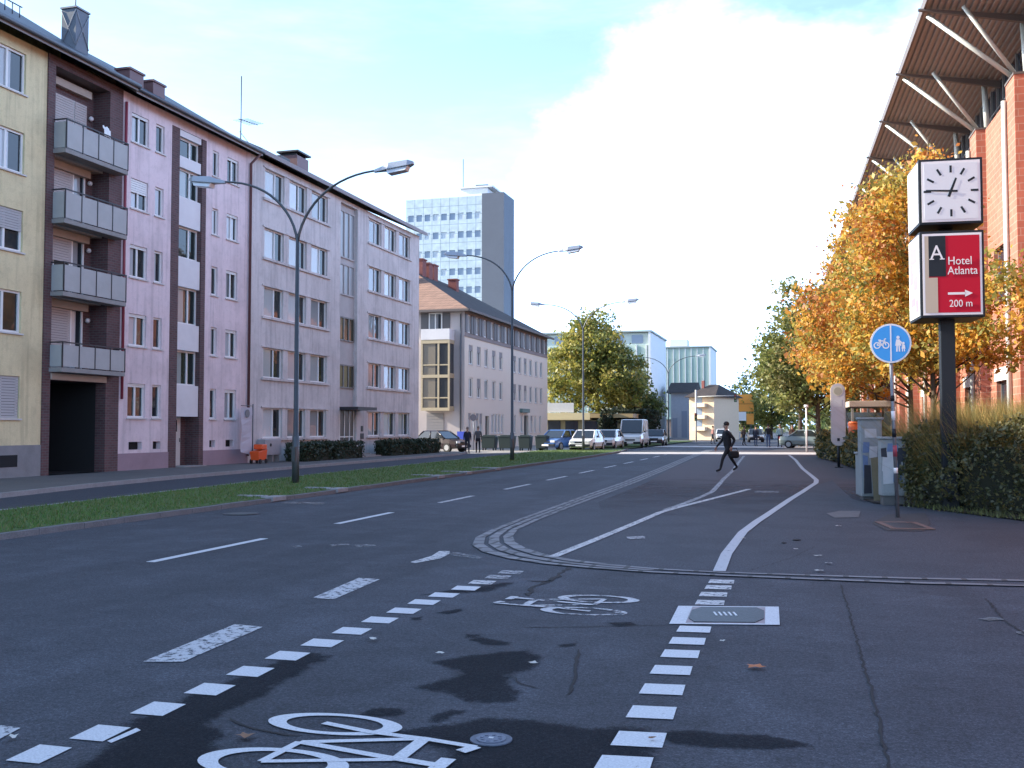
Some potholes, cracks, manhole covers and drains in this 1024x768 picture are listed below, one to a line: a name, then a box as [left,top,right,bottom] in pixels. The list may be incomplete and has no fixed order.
crack [565,649,580,696]
manhole cover [874,521,936,530]
manhole cover [669,606,780,625]
manhole cover [470,732,512,746]
crack [523,566,571,596]
crack [985,598,1024,633]
crack [840,584,891,768]
